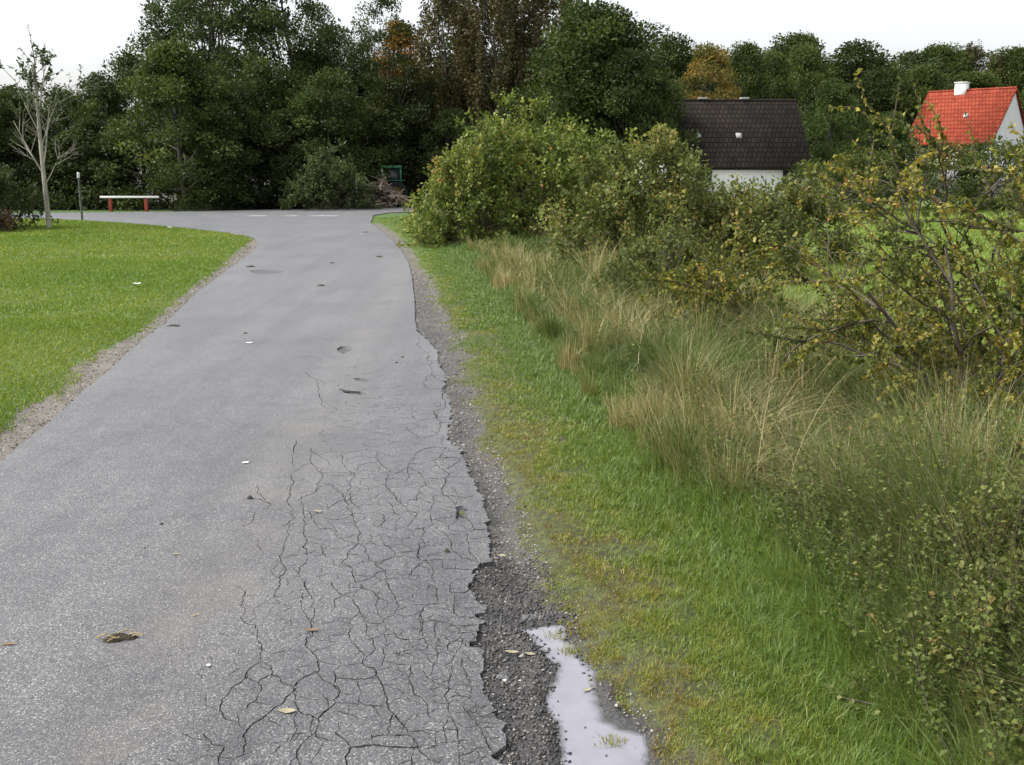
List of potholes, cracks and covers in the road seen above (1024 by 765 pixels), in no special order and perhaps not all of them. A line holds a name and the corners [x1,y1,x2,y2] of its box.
crack [167,357,500,765]
